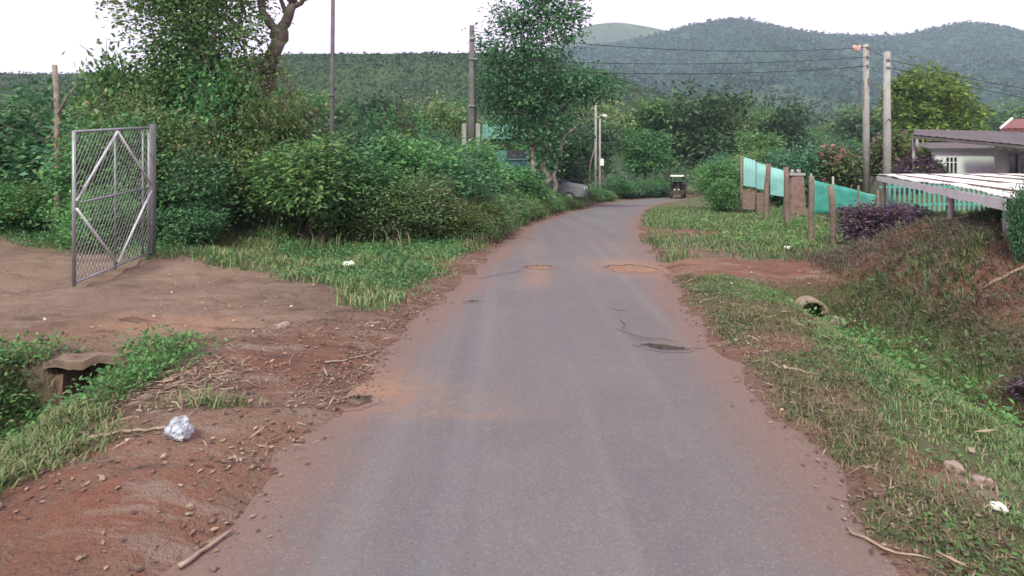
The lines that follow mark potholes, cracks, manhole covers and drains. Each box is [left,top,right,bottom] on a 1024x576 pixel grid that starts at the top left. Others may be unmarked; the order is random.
crack [612,308,700,349]
pothole [338,391,382,411]
pothole [600,263,662,273]
pothole [632,341,696,353]
